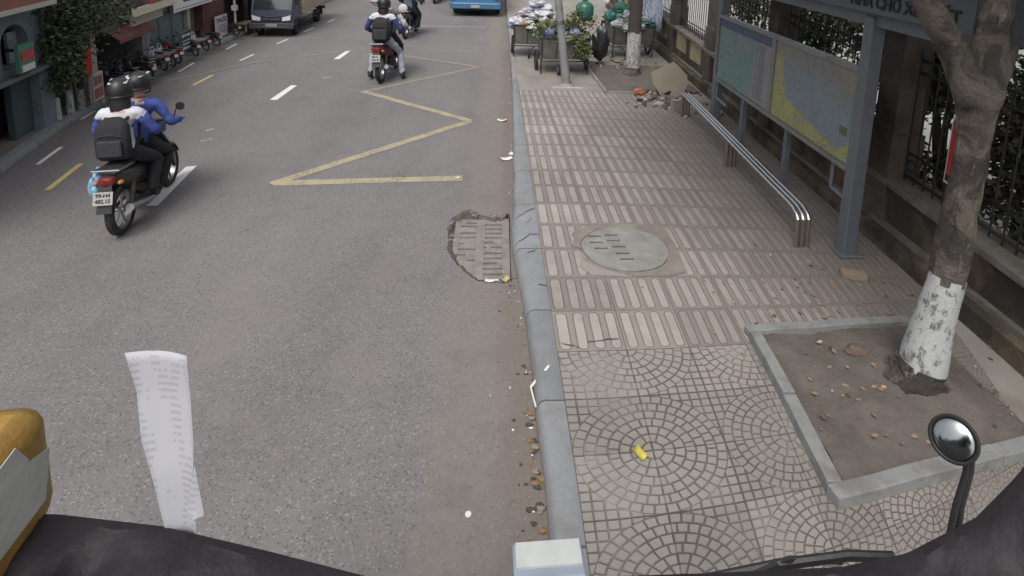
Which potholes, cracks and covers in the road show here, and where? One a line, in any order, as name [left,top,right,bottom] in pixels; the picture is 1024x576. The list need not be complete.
drain grate [453,219,511,284]
manhole cover [572,222,687,277]
